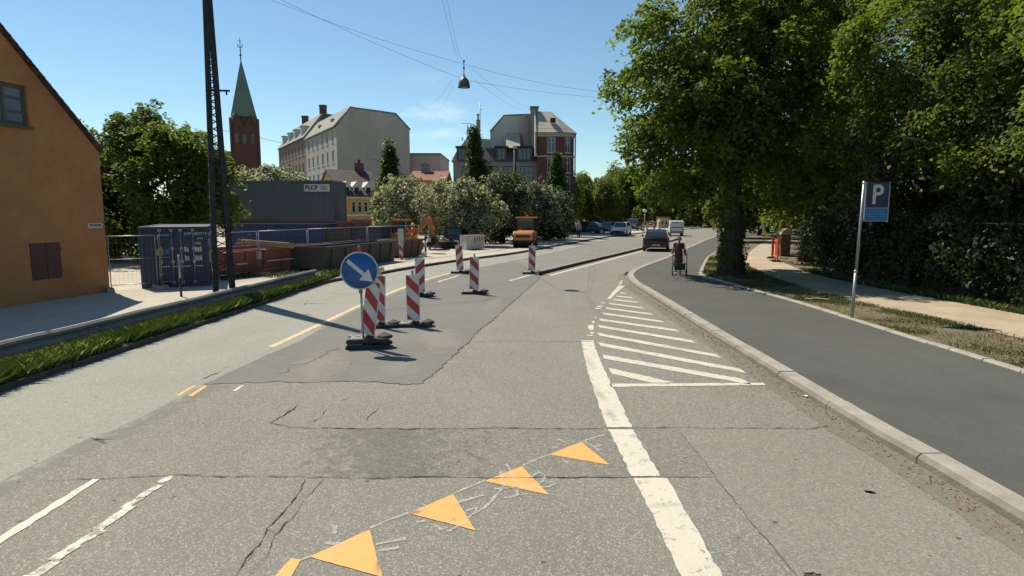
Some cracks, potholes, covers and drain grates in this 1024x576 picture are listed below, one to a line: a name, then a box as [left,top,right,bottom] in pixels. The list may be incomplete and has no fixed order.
crack [214,277,826,429]
